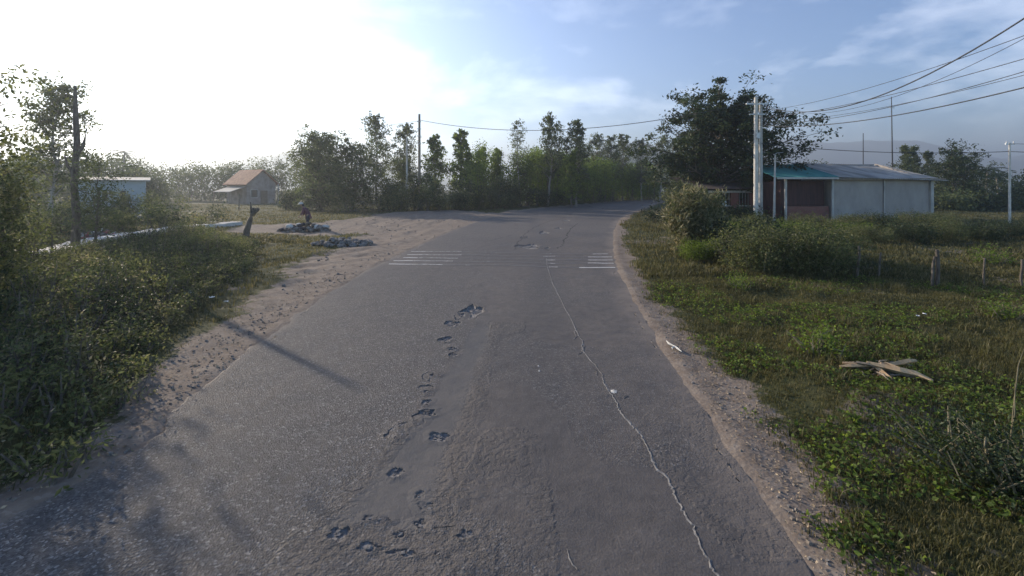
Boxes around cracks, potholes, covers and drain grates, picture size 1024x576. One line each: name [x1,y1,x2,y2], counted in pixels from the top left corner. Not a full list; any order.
pothole [454,303,488,320]
crack [485,218,720,576]
pothole [422,429,458,447]
pothole [377,462,414,484]
pothole [315,521,360,551]
